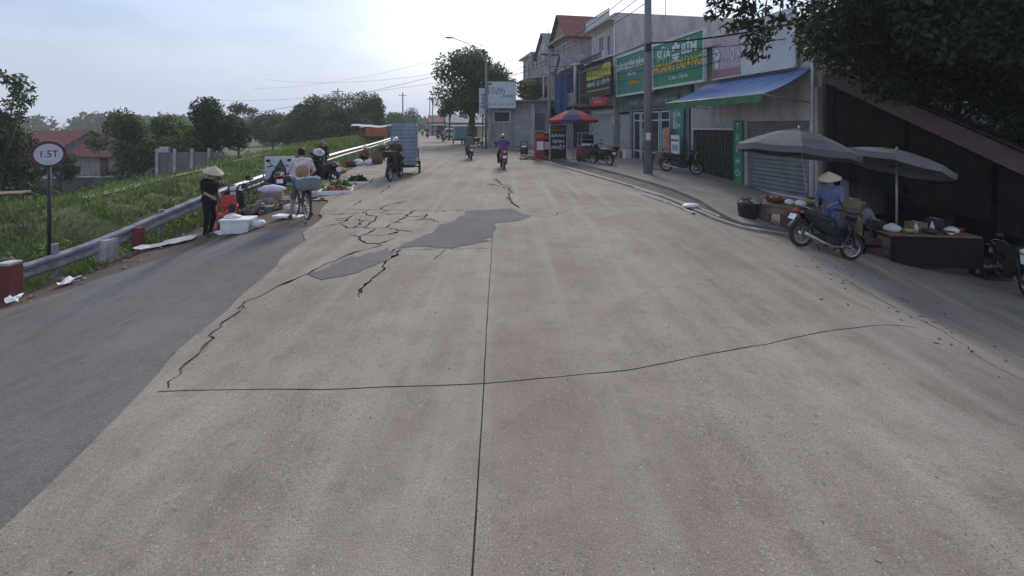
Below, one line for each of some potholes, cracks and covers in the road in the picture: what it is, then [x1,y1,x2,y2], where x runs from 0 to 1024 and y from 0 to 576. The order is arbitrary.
crack [490,178,519,208]
crack [167,171,488,383]
